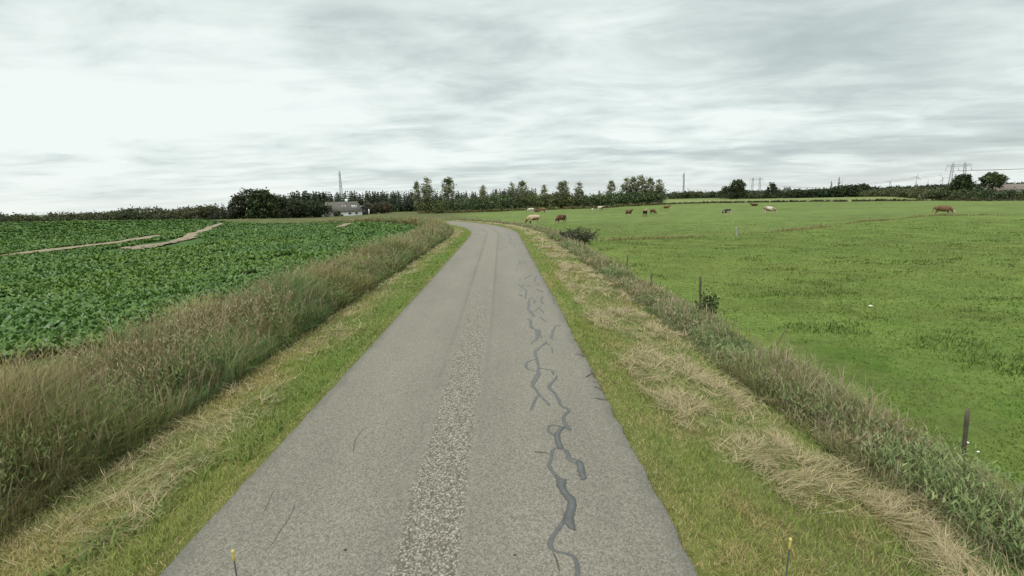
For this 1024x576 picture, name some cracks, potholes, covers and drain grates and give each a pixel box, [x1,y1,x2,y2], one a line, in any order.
crack [264,492,295,546]
